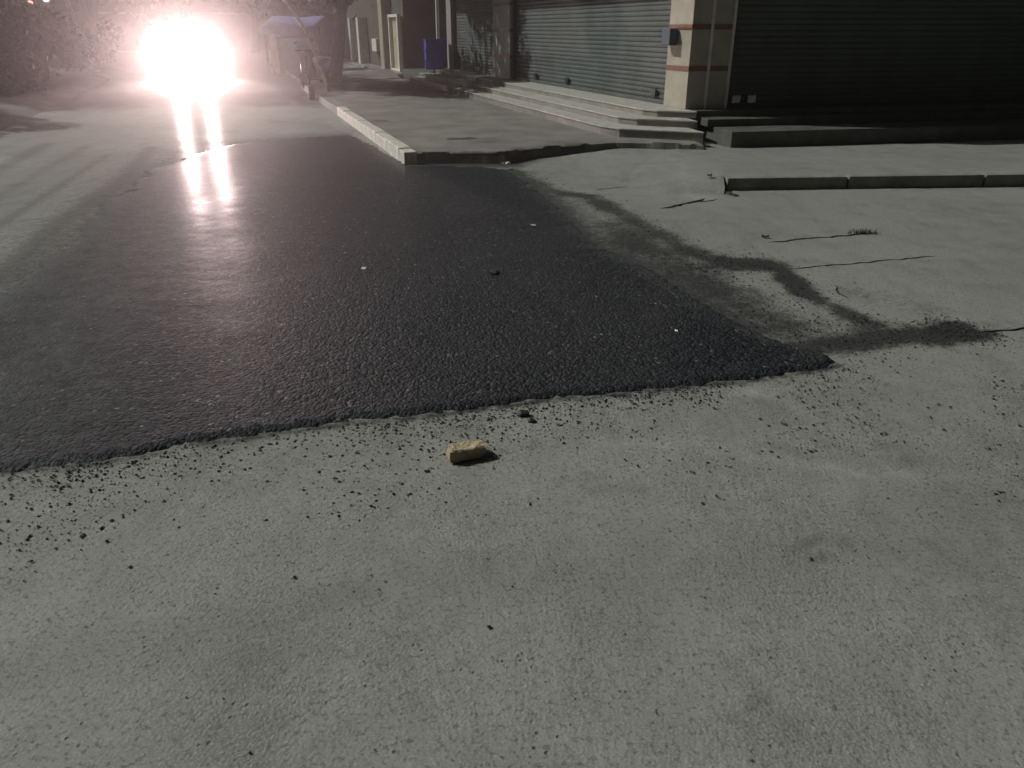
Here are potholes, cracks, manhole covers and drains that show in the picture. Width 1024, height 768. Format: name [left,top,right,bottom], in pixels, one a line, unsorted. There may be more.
crack [790,256,934,300]
crack [659,198,717,209]
crack [768,232,878,243]
